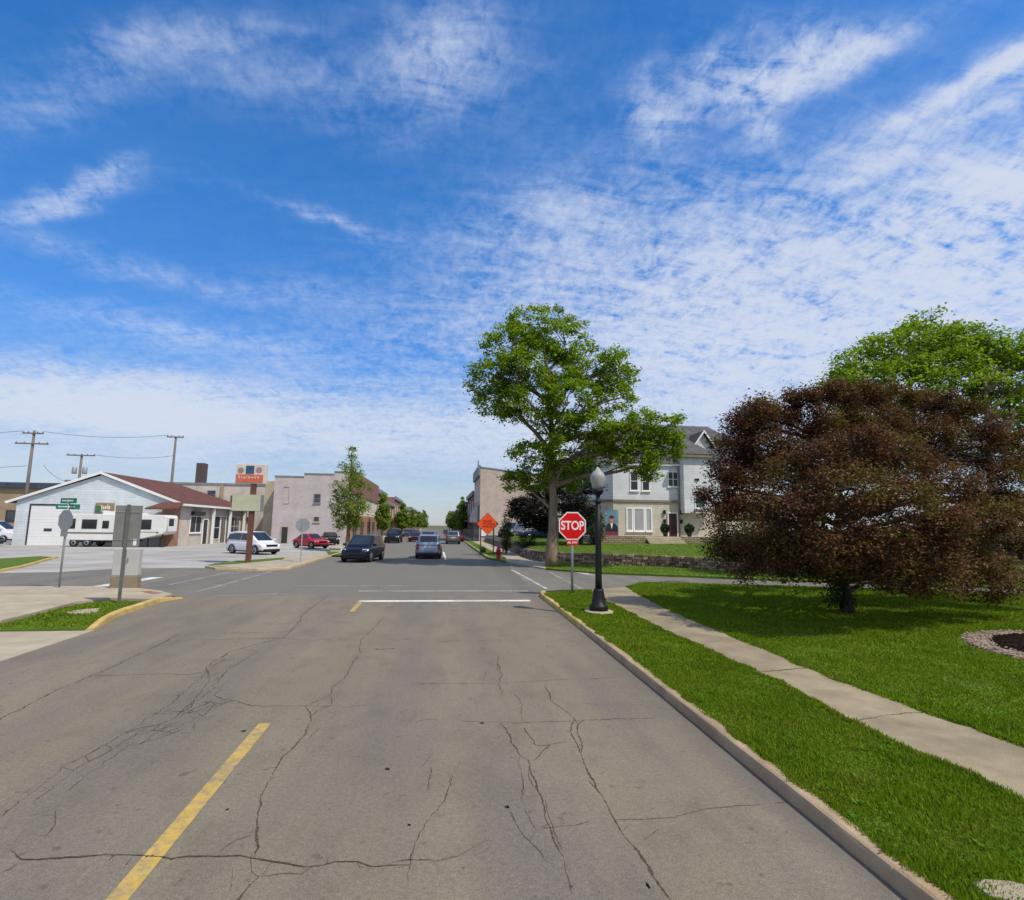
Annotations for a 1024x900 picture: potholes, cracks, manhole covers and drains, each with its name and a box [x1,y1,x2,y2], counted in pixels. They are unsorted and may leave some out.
crack [1,594,787,900]
